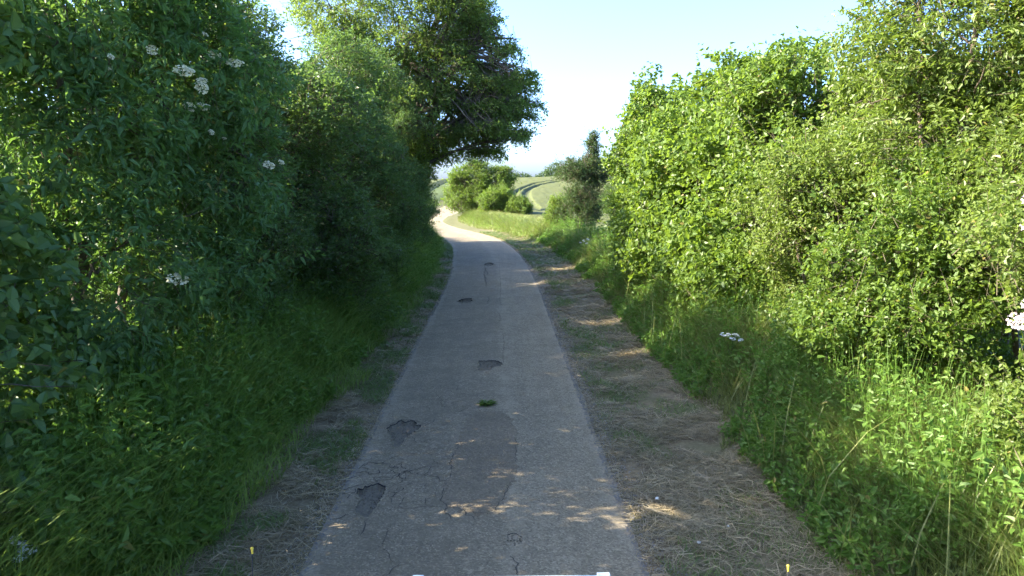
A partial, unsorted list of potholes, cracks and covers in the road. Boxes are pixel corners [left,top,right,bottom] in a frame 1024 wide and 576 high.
pothole [352,481,389,520]
pothole [383,419,424,448]
pothole [474,360,506,371]
crack [336,357,482,574]
